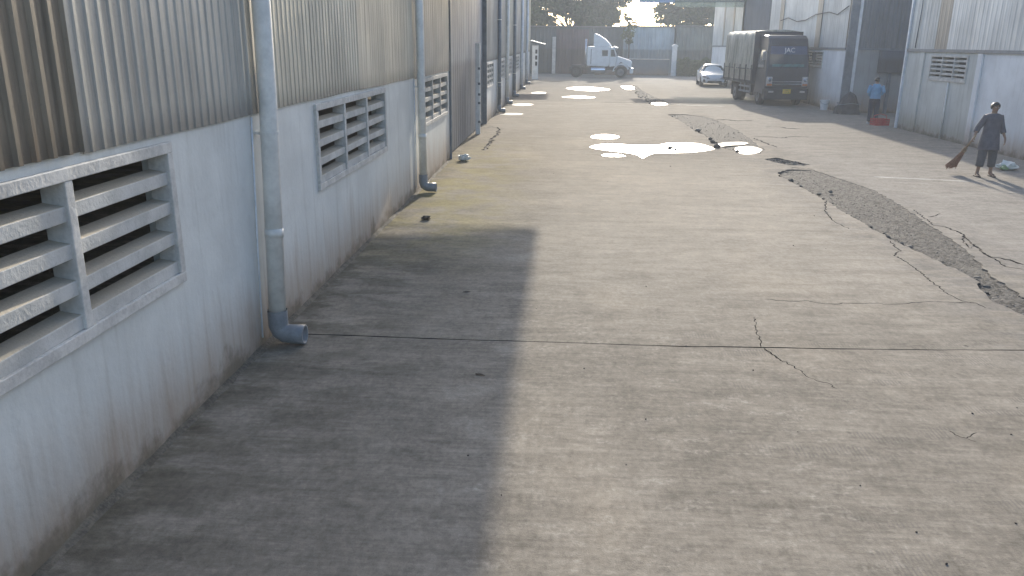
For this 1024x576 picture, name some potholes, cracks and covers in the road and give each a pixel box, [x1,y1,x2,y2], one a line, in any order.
crack [771,241,984,307]
crack [754,318,837,389]
crack [482,127,500,150]
crack [914,210,1024,270]
pothole [766,158,809,166]
